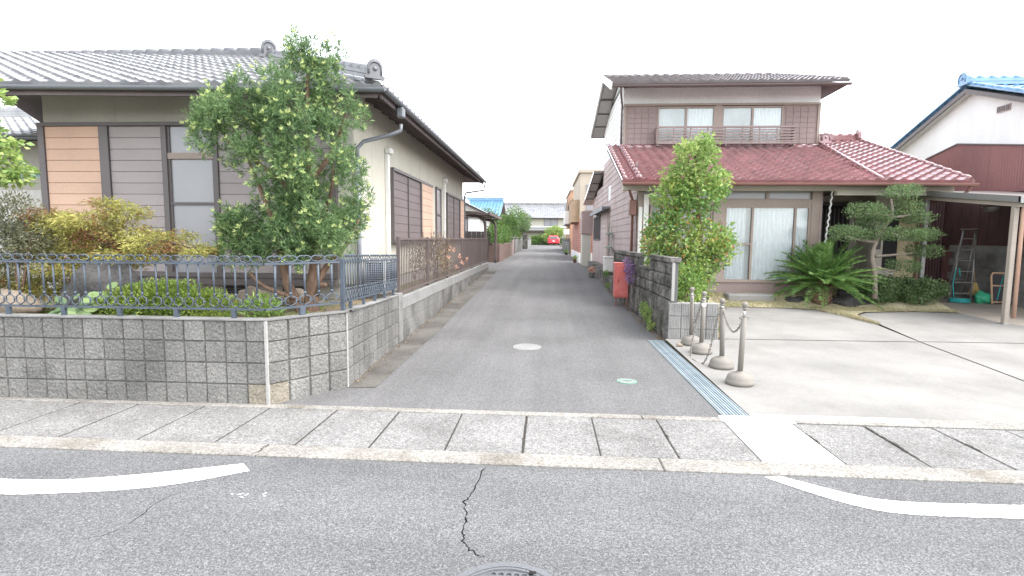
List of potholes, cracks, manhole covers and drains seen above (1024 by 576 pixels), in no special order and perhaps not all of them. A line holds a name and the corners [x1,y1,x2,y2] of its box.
drain grate [648,340,677,353]
drain grate [660,353,694,368]
manhole cover [459,562,552,576]
drain grate [675,368,718,389]
crack [461,466,486,558]
drain grate [695,388,749,416]
